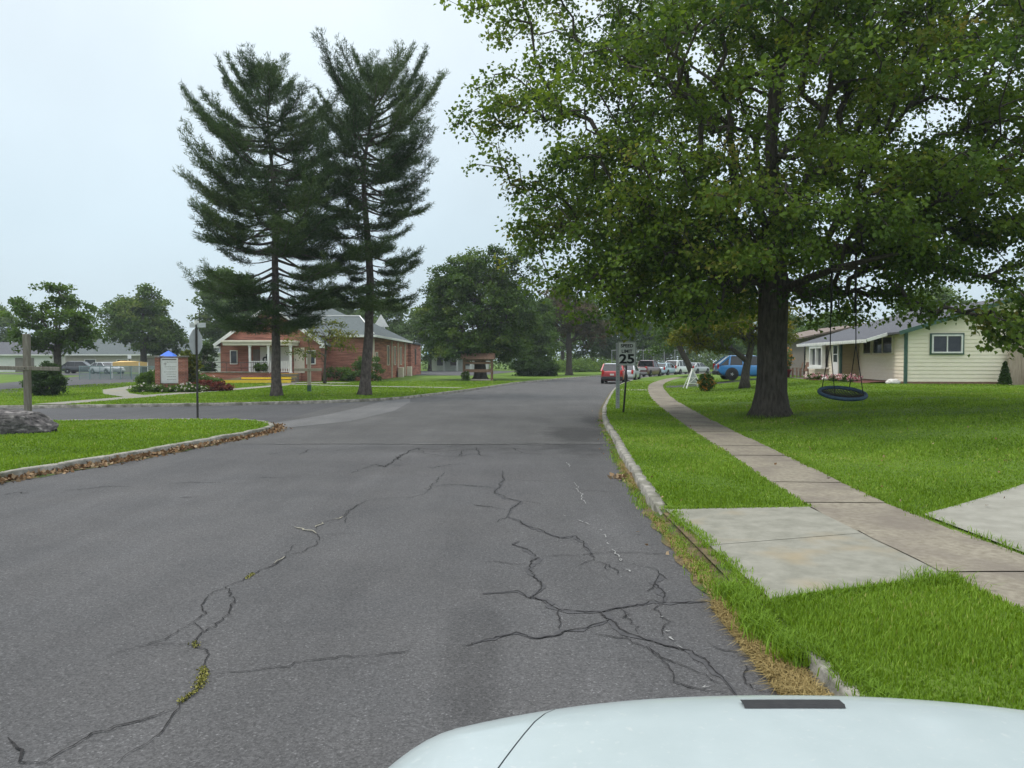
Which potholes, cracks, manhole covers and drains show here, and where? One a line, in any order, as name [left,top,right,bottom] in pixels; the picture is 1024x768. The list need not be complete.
crack [216,444,765,695]
crack [8,475,442,763]
